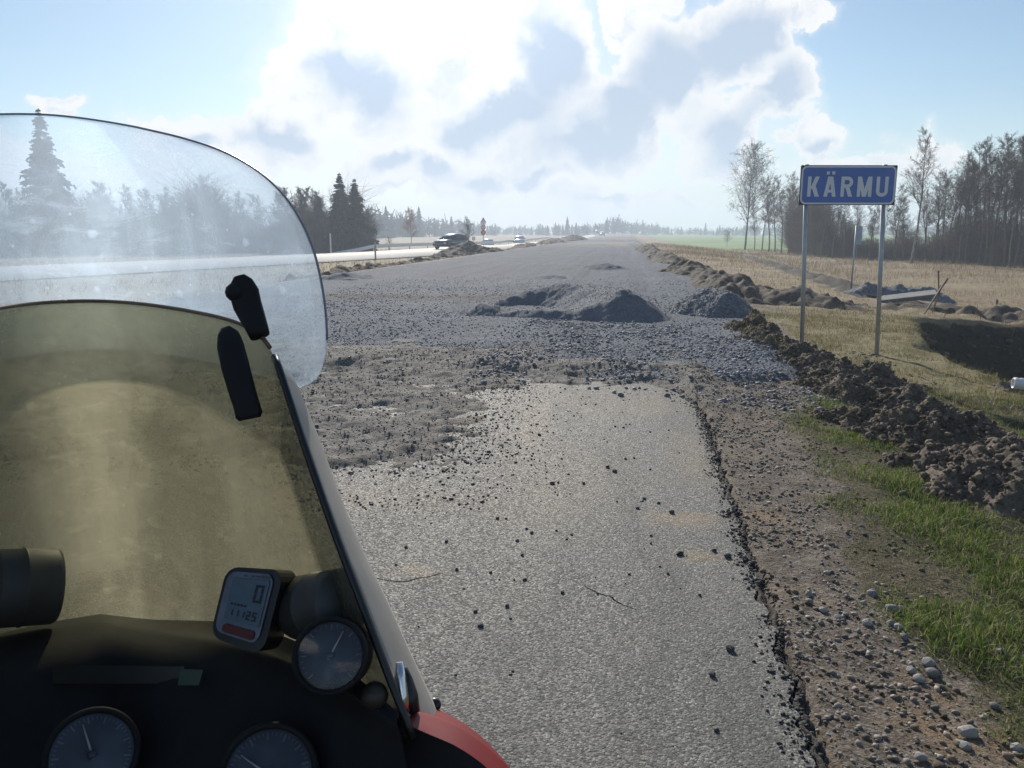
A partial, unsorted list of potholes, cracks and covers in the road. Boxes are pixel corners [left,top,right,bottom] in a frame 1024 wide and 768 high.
crack [680,397,829,768]
